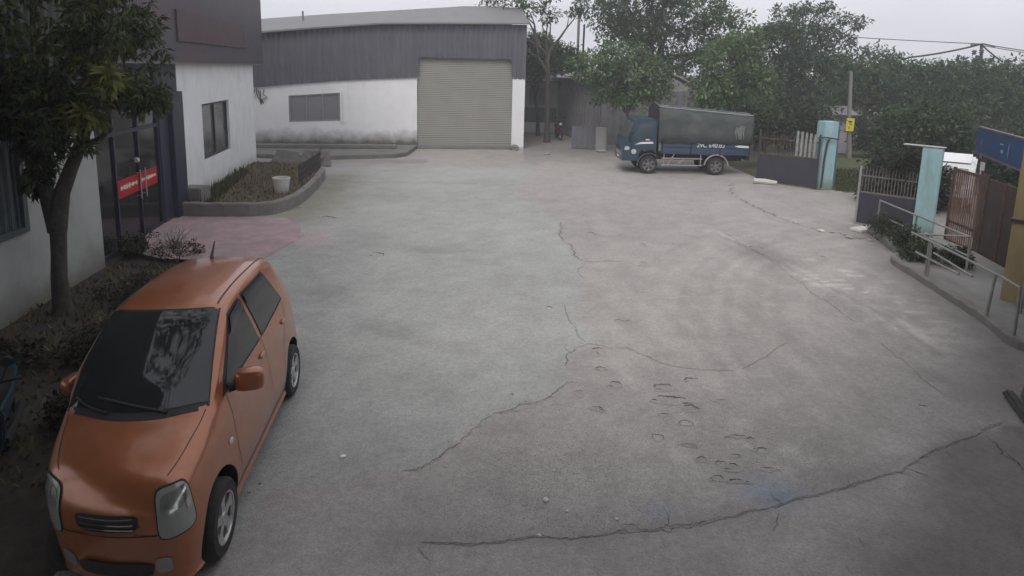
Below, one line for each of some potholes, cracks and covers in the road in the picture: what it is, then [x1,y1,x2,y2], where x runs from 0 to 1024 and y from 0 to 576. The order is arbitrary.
pothole [649,395,698,407]
pothole [681,404,703,413]
pothole [724,462,745,473]
crack [770,490,781,531]
pothole [605,381,625,389]
crack [726,181,818,230]
crack [879,341,942,393]
crack [977,422,1024,471]
pothole [651,383,675,391]
crack [556,222,620,278]
pothole [681,377,708,386]
